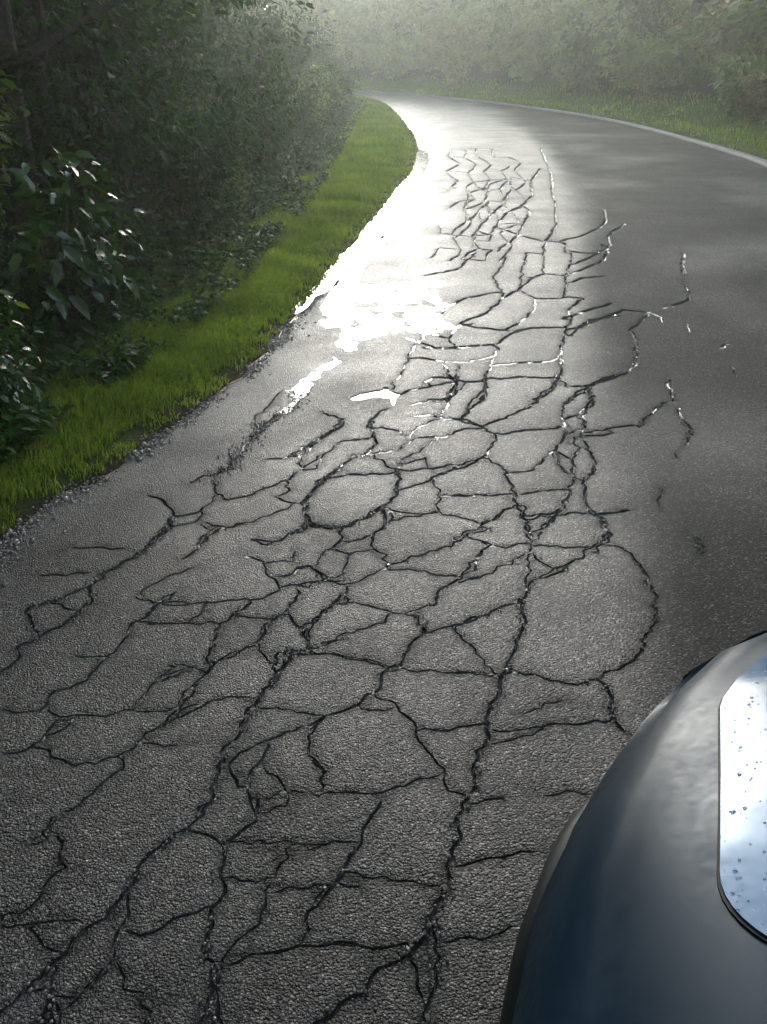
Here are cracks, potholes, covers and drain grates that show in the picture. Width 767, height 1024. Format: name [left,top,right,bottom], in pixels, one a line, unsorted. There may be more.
crack [0,148,694,1024]
